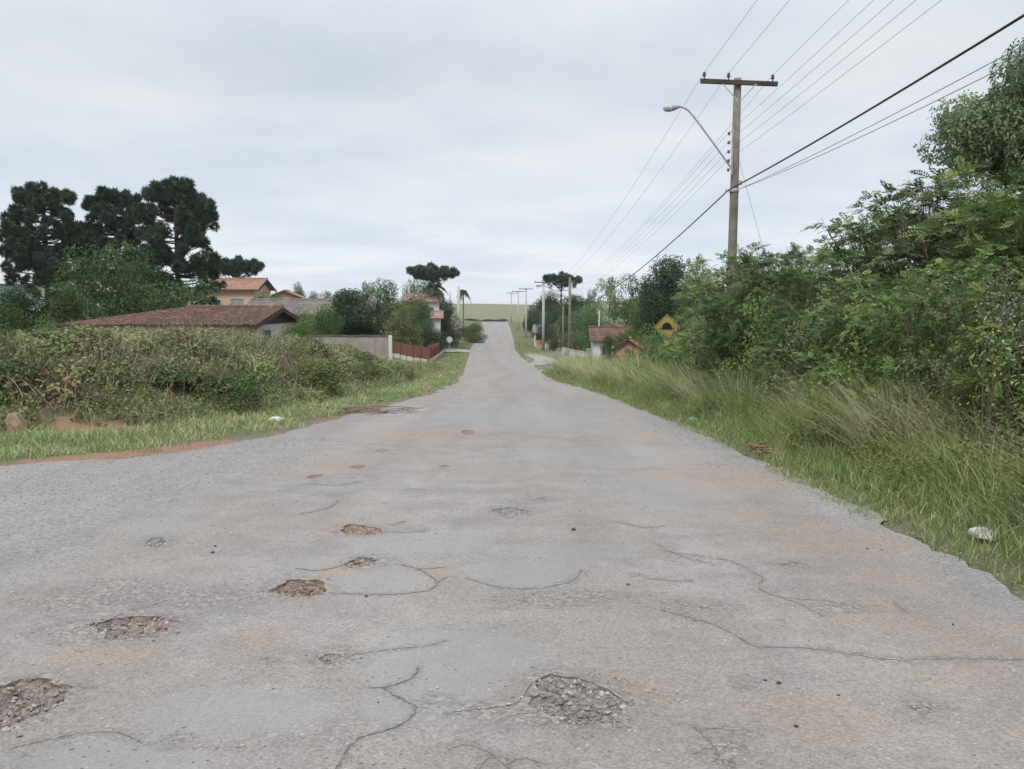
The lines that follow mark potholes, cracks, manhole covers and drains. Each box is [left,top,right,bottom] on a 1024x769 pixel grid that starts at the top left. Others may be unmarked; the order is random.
crack [660,609,1024,661]
pothole [337,554,379,568]
pothole [89,611,208,645]
crack [465,570,583,589]
crack [451,680,537,714]
crack [15,731,143,748]
pothole [144,537,167,551]
crack [688,724,746,769]
crack [335,641,444,769]
crack [619,522,849,615]
pothole [504,669,647,739]
crack [328,564,447,595]
